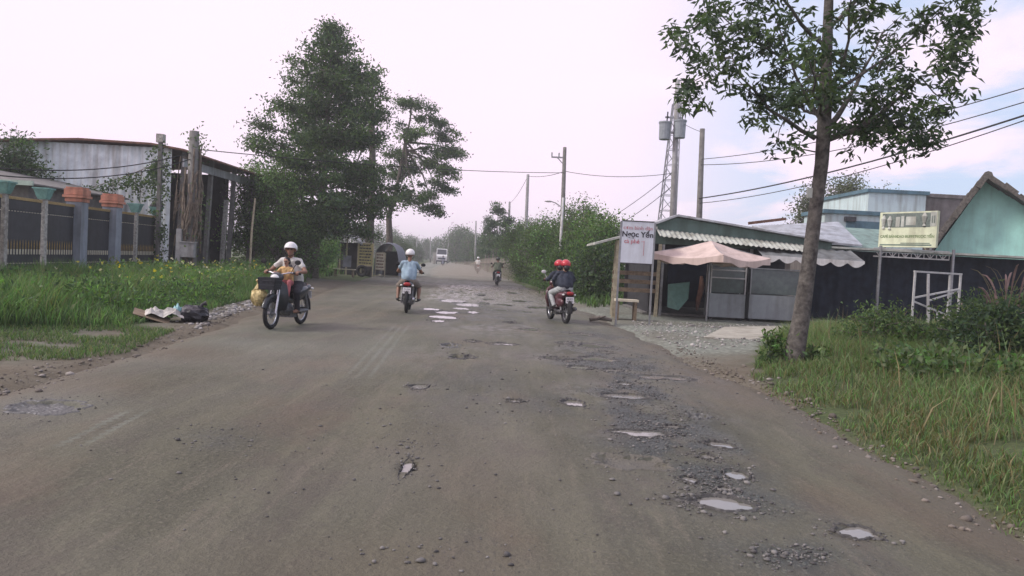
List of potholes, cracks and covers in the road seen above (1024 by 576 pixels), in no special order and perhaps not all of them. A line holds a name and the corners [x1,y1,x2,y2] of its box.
pothole [670,493,760,513]
pothole [3,398,94,416]
pothole [701,438,738,450]
pothole [830,522,889,541]
pothole [722,468,752,481]
pothole [558,398,587,408]
pothole [605,428,672,438]
pothole [596,391,655,400]
pothole [397,457,415,481]
